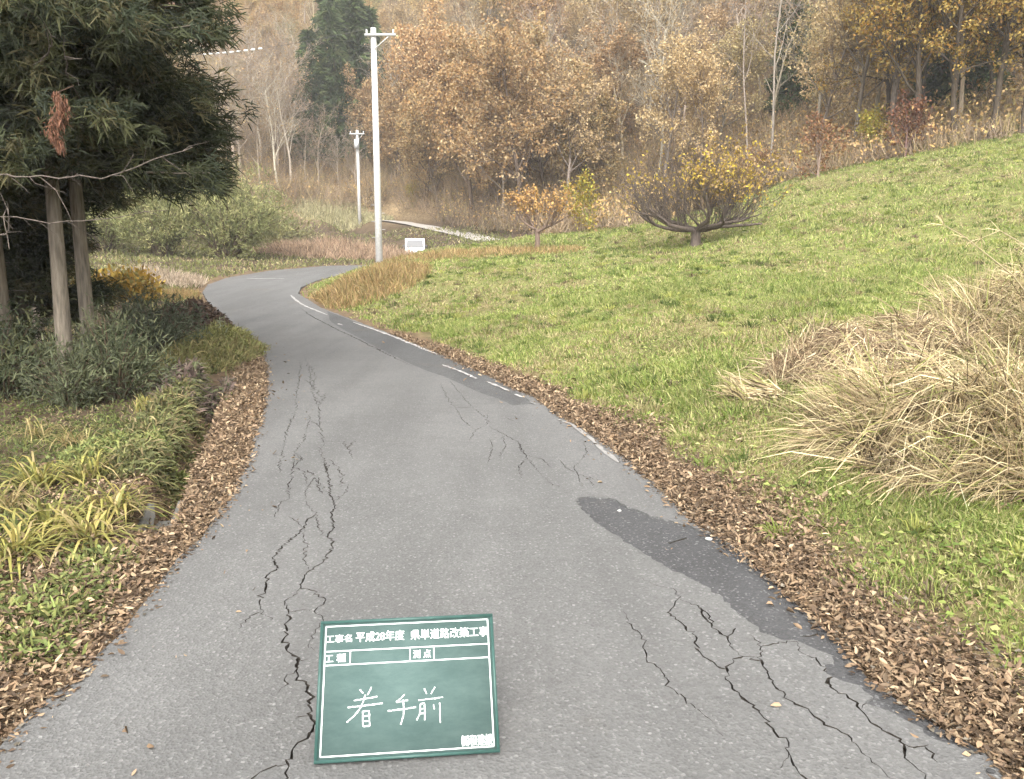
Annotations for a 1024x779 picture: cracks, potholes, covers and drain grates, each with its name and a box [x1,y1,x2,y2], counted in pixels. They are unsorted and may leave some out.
crack [239,363,357,779]
crack [624,580,937,779]
crack [441,381,600,486]
